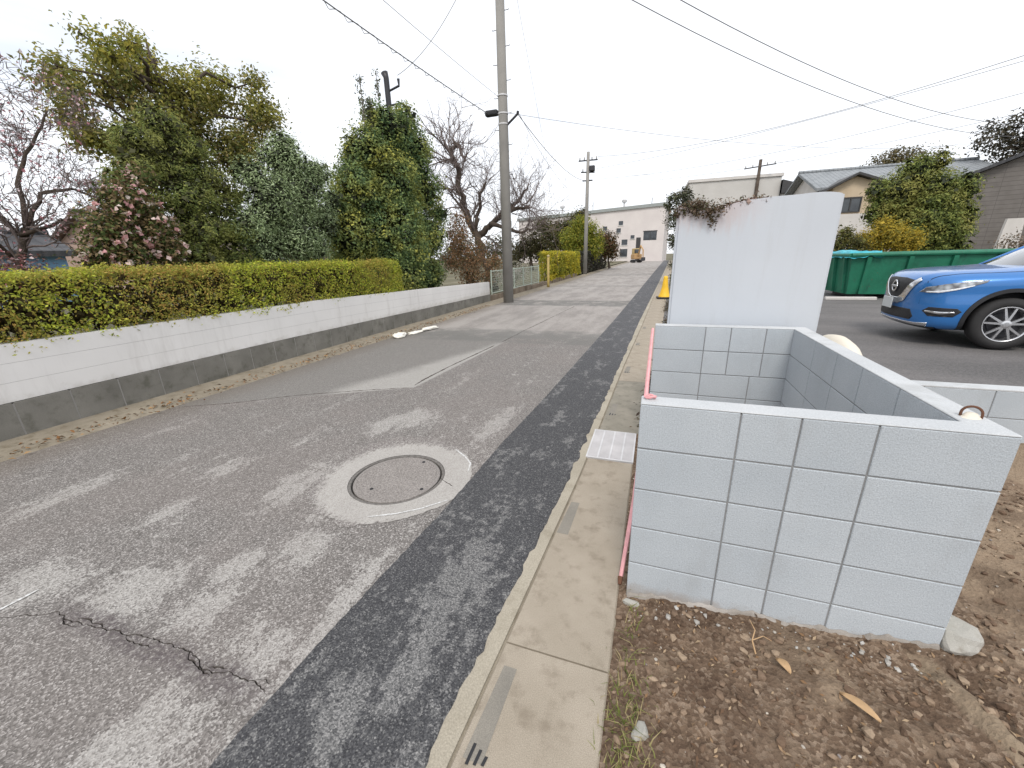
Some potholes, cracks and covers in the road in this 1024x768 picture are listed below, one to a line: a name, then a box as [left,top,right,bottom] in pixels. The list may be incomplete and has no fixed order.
drain grate [586,429,636,464]
crack [0,611,269,694]
manhole cover [305,437,472,528]
